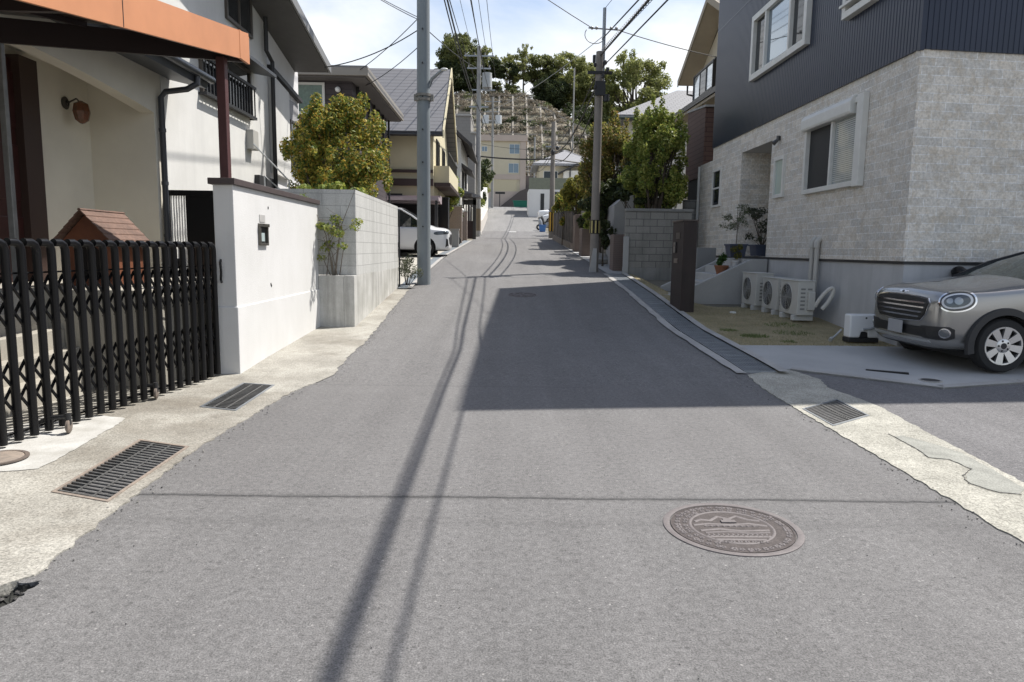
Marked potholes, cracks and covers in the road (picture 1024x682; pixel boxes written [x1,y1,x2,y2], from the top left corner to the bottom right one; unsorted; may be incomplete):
utility cover [0,450,30,465]
drain grate [51,439,189,502]
drain grate [802,399,870,426]
manhole cover [663,503,805,557]
pothole [0,584,37,607]
drain grate [199,383,274,411]
